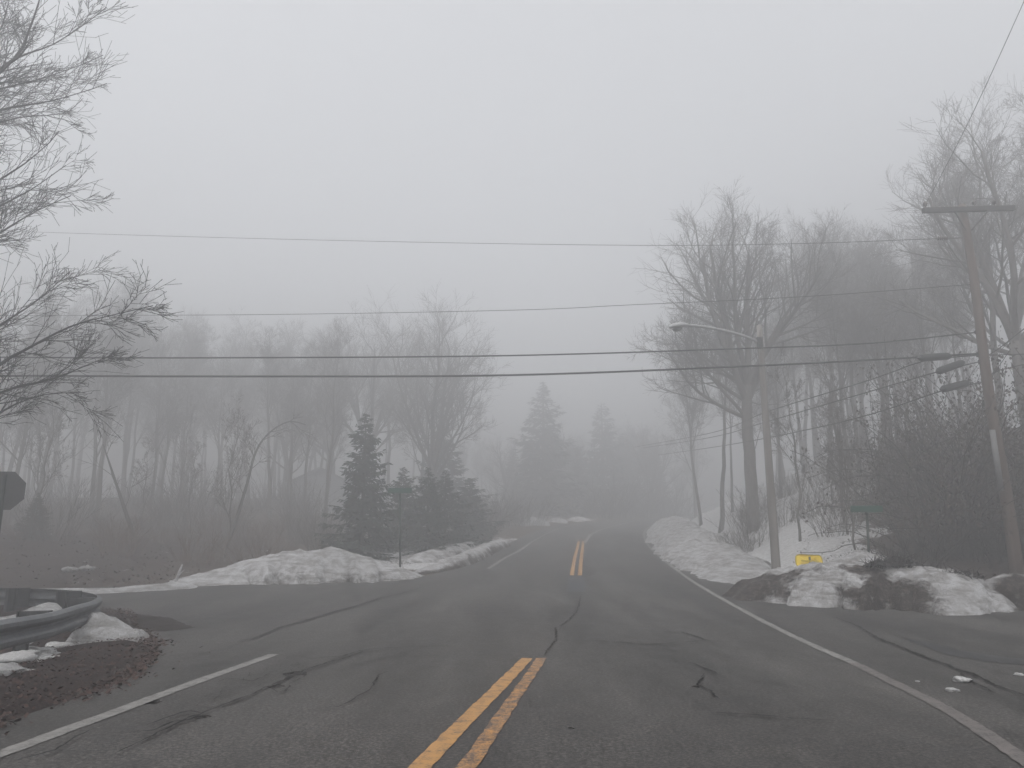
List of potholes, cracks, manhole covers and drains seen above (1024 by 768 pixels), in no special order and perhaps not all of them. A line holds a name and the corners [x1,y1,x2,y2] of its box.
crack [544,594,729,655]
crack [114,645,448,754]
crack [689,662,825,720]
